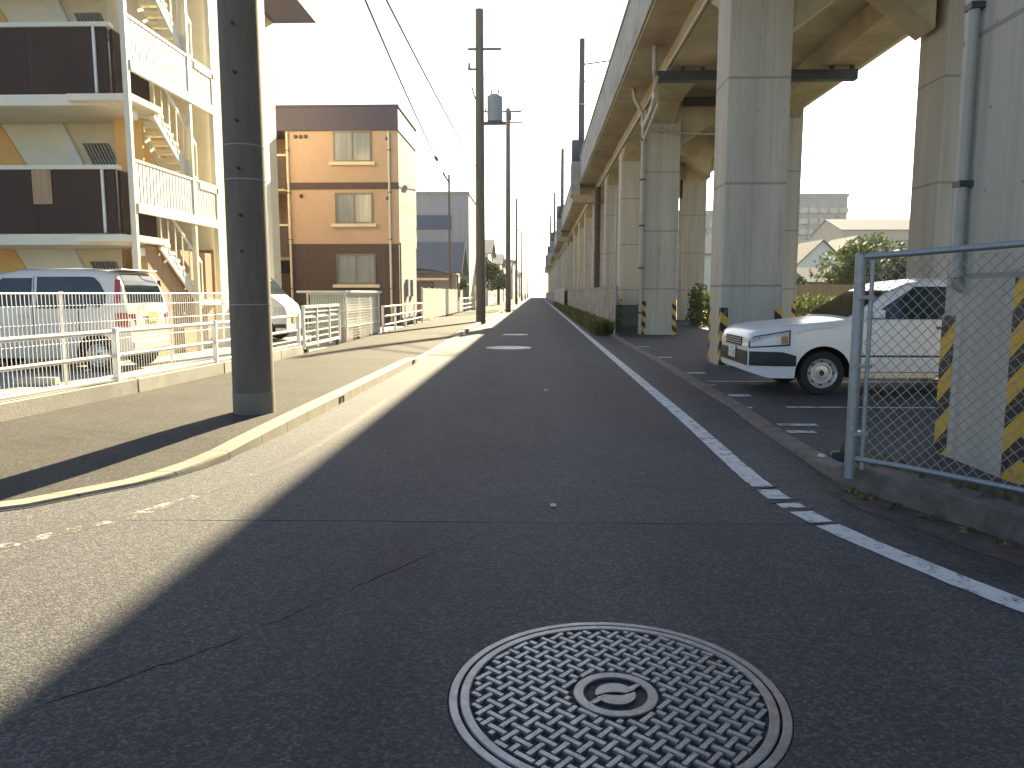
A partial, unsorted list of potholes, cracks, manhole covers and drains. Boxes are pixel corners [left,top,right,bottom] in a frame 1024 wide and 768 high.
crack [41,487,823,706]
manhole cover [448,622,793,768]
